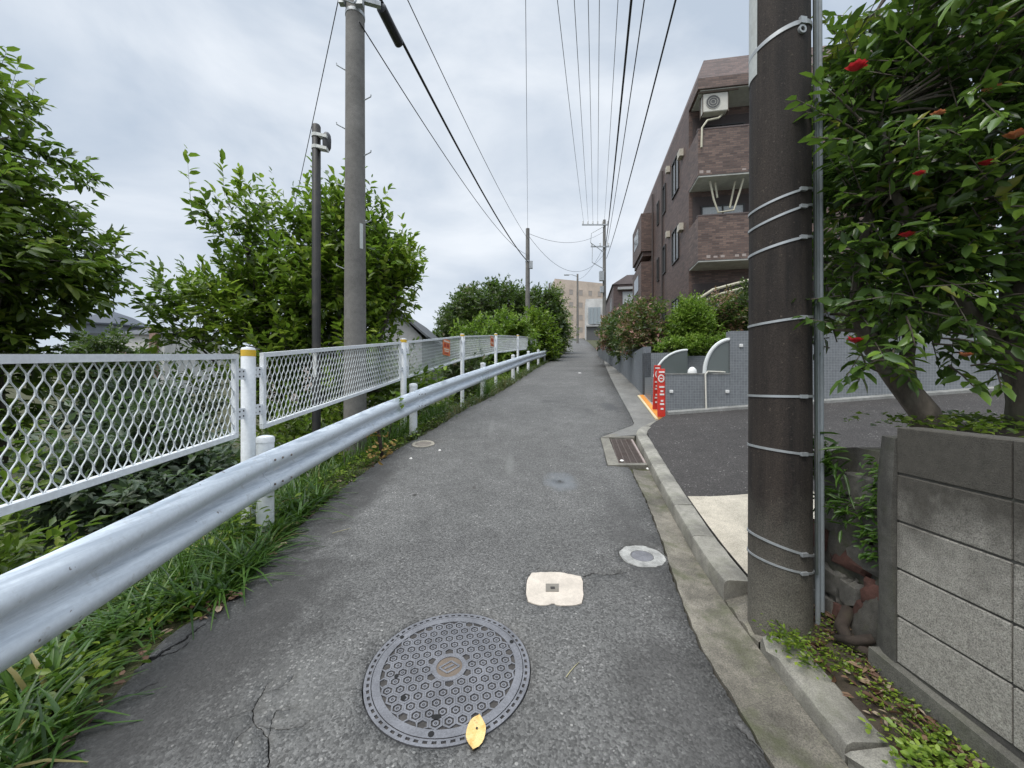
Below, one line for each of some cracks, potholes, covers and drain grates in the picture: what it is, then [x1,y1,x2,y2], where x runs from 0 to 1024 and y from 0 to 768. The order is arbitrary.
utility cover [411,440,435,448]
crack [124,625,204,696]
crack [232,674,306,767]
utility cover [619,545,666,568]
manhole cover [362,613,531,749]
drain grate [601,434,648,469]
